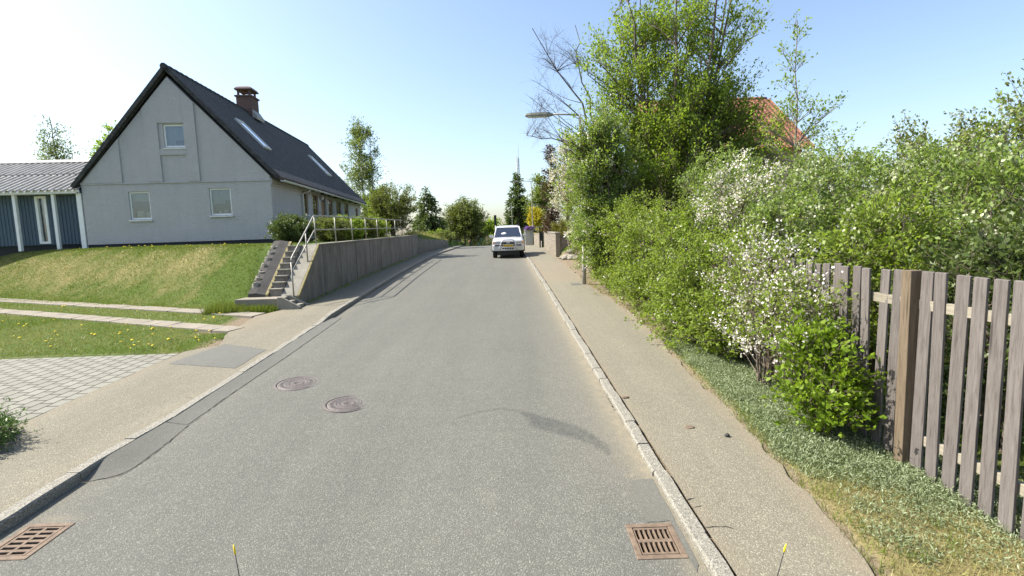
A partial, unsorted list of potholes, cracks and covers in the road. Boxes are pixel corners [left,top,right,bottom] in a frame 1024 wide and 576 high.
manhole cover [274,376,320,391]
drain grate [625,523,689,560]
manhole cover [323,395,365,413]
drain grate [0,522,76,561]
